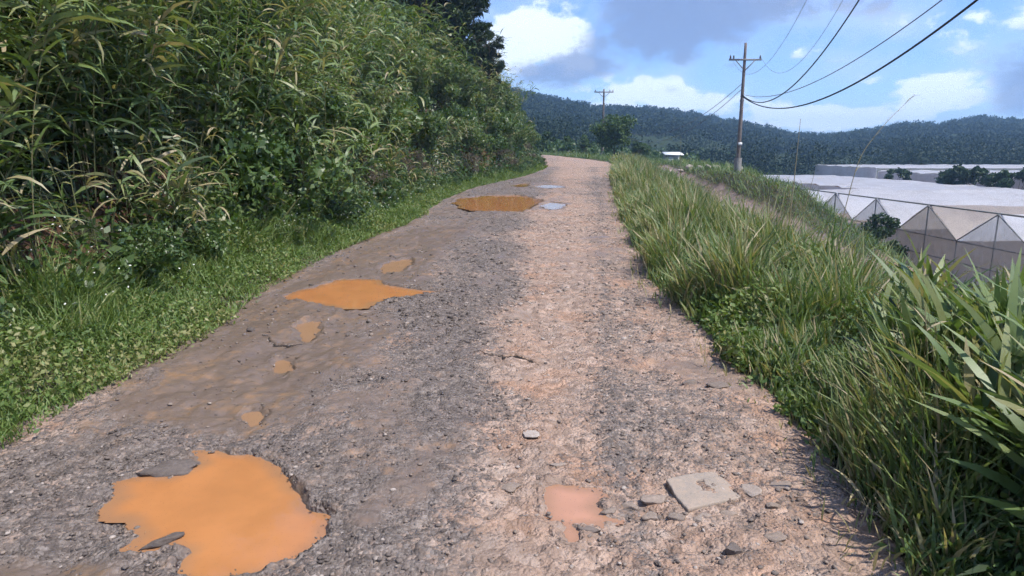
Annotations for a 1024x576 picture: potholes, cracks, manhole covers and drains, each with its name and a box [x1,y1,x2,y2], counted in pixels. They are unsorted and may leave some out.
pothole [447,194,549,213]
pothole [233,403,274,433]
pothole [536,201,570,211]
pothole [277,277,449,313]
pothole [534,475,626,550]
crack [478,350,542,366]
pothole [373,257,418,275]
pothole [264,353,300,378]
pothole [95,445,343,576]
pothole [289,315,327,344]
